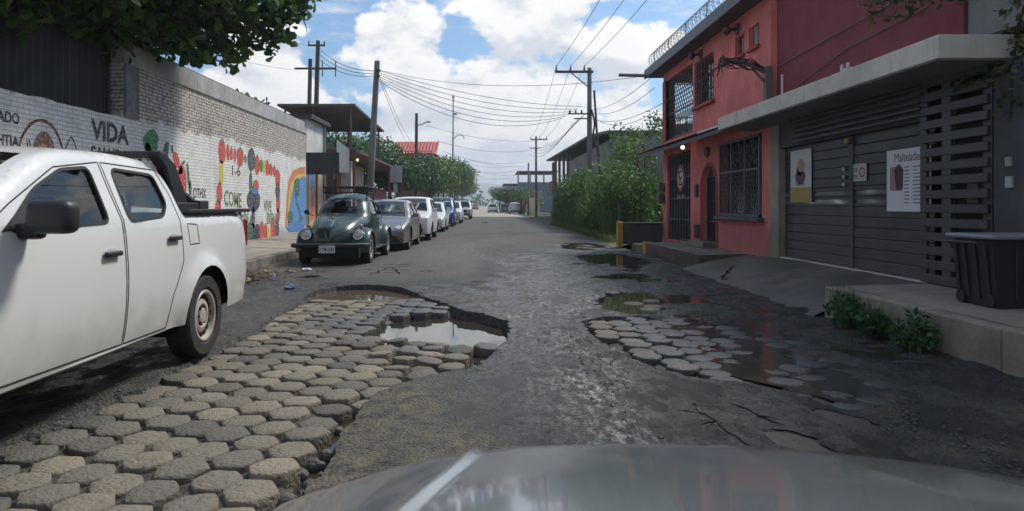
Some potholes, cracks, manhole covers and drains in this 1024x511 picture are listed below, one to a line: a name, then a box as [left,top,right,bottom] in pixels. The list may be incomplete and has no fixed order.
pothole [581,315,902,423]
crack [680,402,782,446]
crack [365,264,421,275]
pothole [304,284,418,303]
crack [721,266,735,280]
pothole [594,292,668,315]
pothole [0,293,454,511]
pothole [375,307,512,382]
